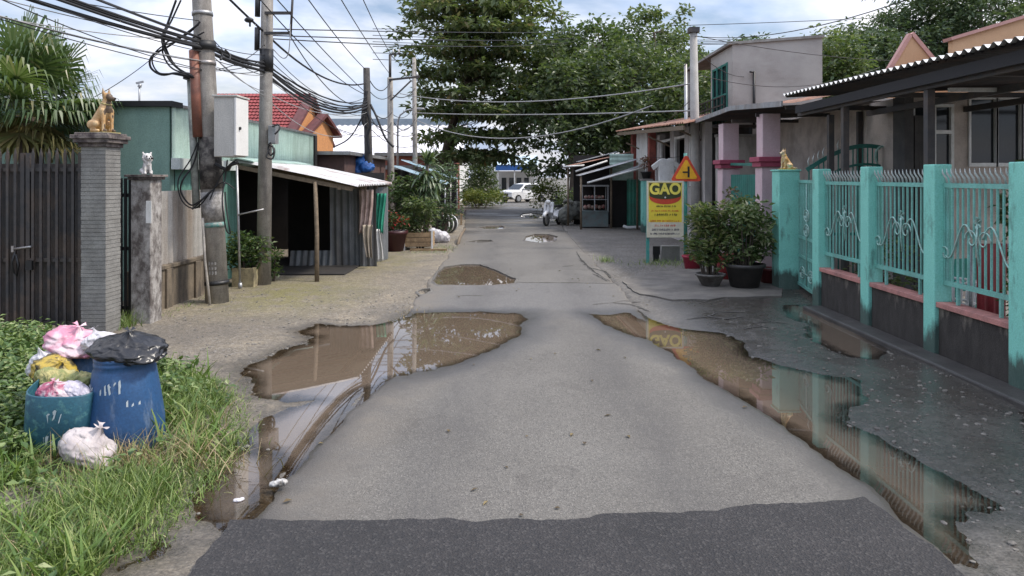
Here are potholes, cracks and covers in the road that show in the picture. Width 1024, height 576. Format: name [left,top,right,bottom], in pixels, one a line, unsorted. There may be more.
pothole [523,234,558,244]
crack [572,252,611,281]
pothole [431,264,518,286]
crack [599,300,649,311]
